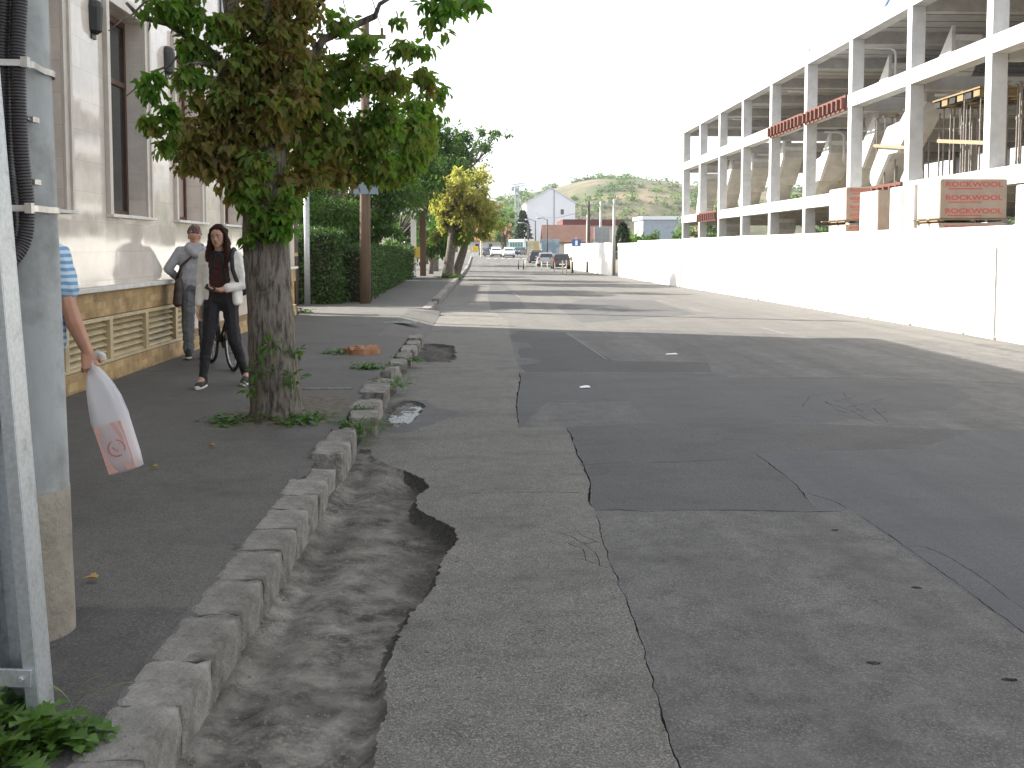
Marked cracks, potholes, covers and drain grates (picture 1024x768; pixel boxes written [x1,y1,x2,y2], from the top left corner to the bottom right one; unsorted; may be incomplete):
pothole [417,344,457,362]
crack [509,430,848,768]
pothole [175,449,459,768]
pothole [382,401,426,427]
